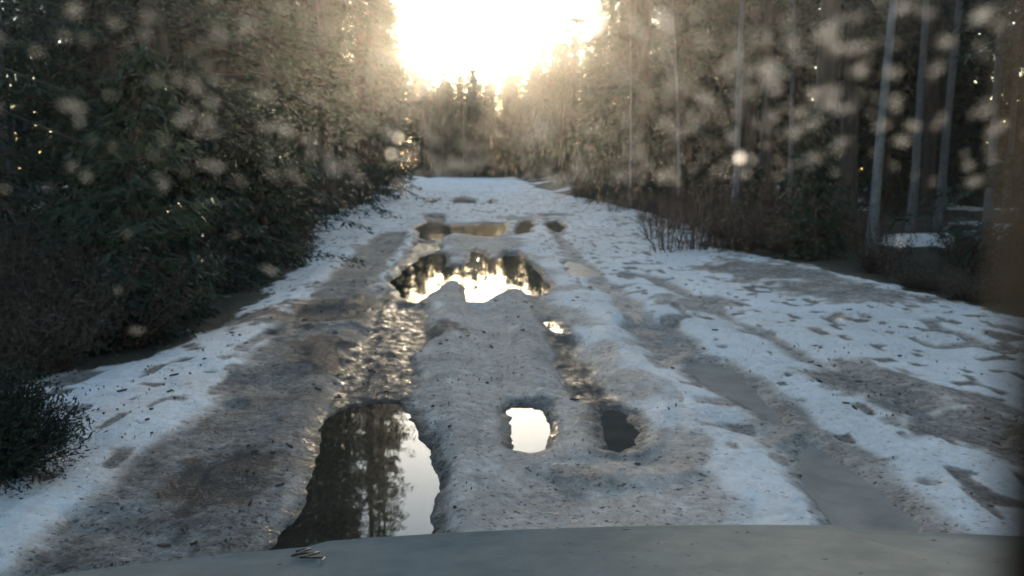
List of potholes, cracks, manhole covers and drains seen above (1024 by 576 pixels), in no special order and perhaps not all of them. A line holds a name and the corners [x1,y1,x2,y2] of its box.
pothole [537,315,573,333]
pothole [495,394,565,453]
pothole [386,246,556,303]
pothole [411,221,510,240]
pothole [543,219,568,233]
pothole [513,218,539,235]
pothole [254,394,455,552]
pothole [589,402,651,453]
